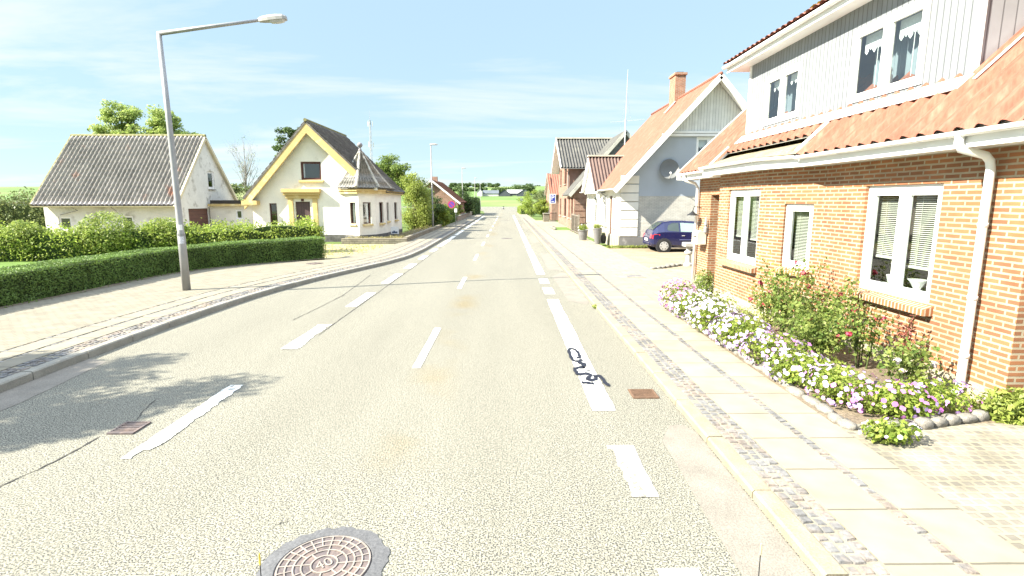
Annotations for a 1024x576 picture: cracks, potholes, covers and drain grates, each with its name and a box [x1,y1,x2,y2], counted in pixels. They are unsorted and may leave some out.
drain grate [628,389,659,399]
drain grate [106,421,152,435]
manhole cover [255,526,390,576]
crack [1,436,100,486]
